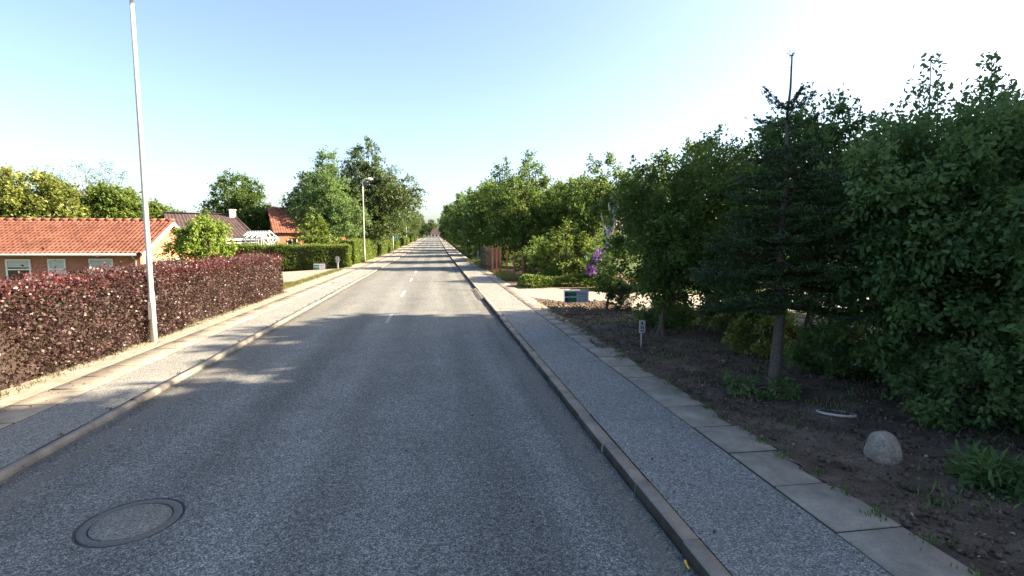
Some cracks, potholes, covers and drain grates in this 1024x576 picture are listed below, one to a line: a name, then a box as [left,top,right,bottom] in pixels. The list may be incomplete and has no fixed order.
manhole cover [71,498,186,548]
